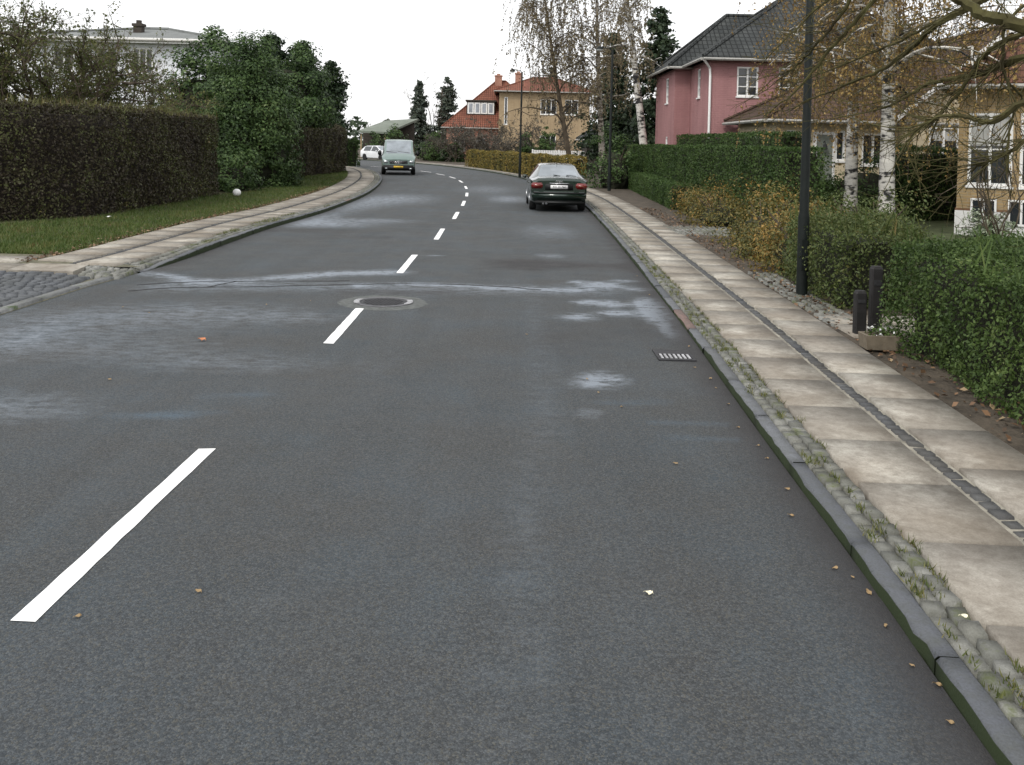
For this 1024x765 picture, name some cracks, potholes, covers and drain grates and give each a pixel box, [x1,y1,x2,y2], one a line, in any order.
manhole cover [337,295,428,311]
drain grate [652,349,697,362]
